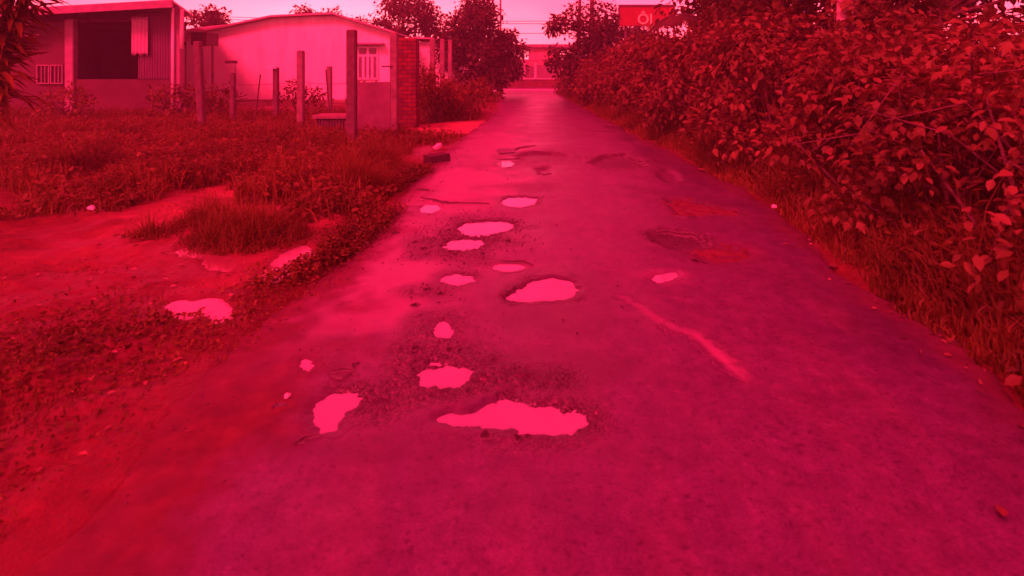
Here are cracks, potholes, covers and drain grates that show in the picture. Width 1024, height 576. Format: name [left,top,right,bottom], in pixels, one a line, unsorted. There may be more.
pothole [433,235,499,254]
pothole [496,196,541,208]
pothole [415,203,447,215]
pothole [639,227,718,257]
pothole [293,380,382,441]
pothole [445,217,524,241]
pothole [492,272,593,307]
pothole [493,160,517,168]
pothole [659,196,750,218]
pothole [431,271,482,287]
pothole [639,267,689,285]
pothole [414,383,613,451]
